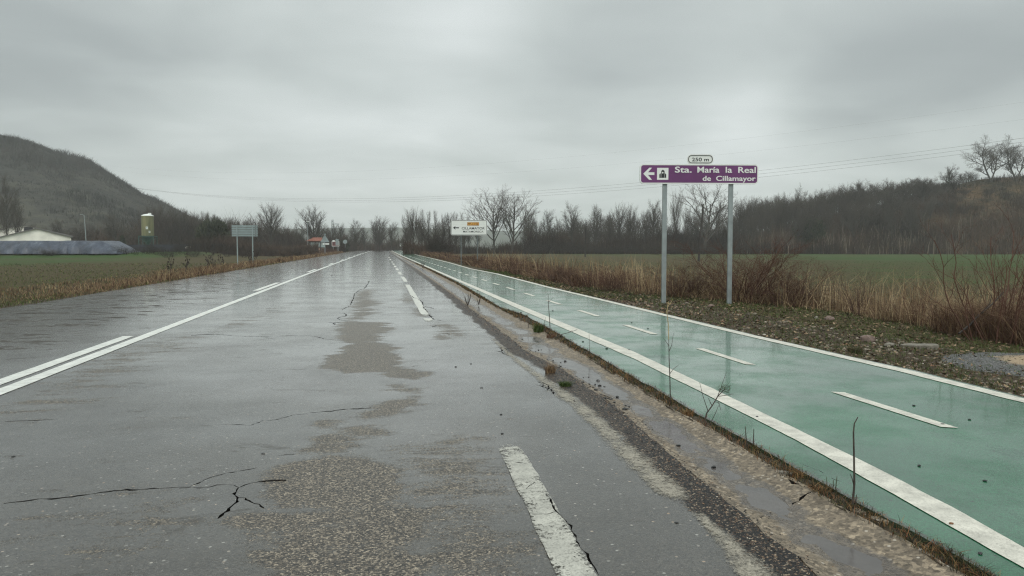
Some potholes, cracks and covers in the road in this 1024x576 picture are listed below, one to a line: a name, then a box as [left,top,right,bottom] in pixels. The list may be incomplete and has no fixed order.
crack [229,408,363,425]
crack [545,495,599,575]
crack [4,467,286,518]
crack [201,281,369,340]
